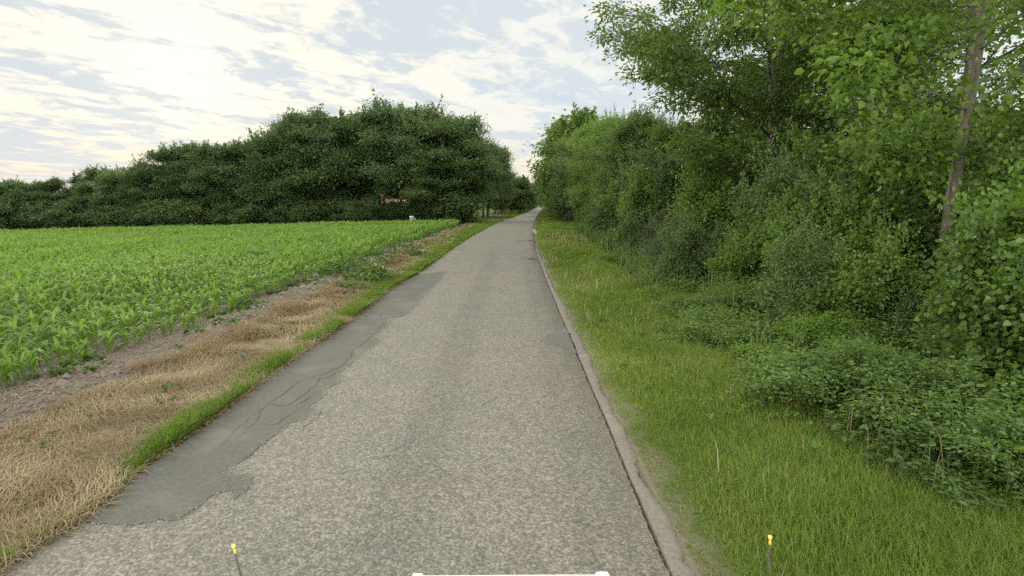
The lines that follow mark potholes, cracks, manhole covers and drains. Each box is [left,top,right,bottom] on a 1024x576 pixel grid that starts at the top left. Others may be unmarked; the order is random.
crack [220,294,427,486]
